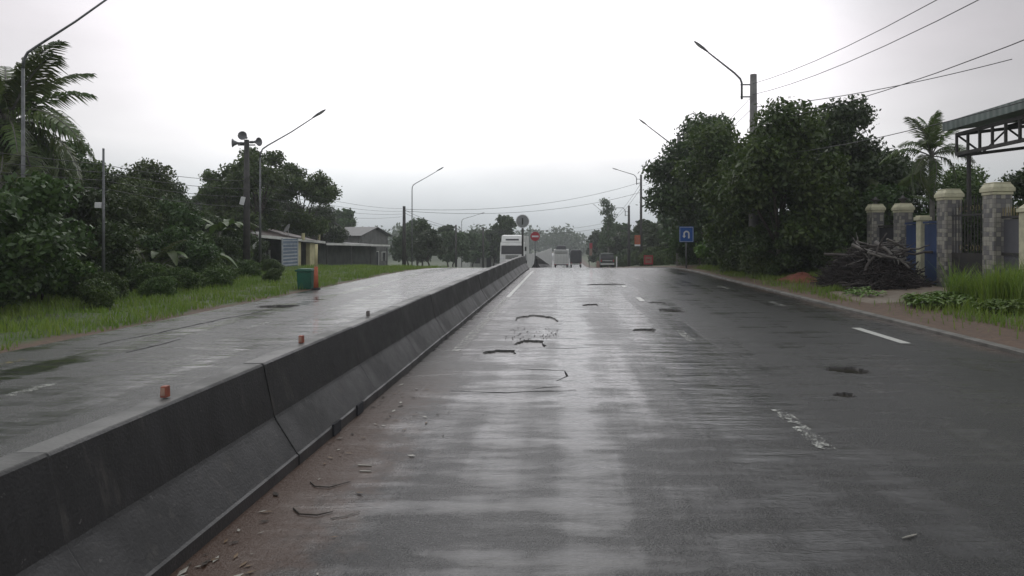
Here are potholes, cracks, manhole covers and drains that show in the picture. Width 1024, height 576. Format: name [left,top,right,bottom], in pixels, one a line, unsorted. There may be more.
crack [460,369,573,393]
pothole [825,366,871,374]
